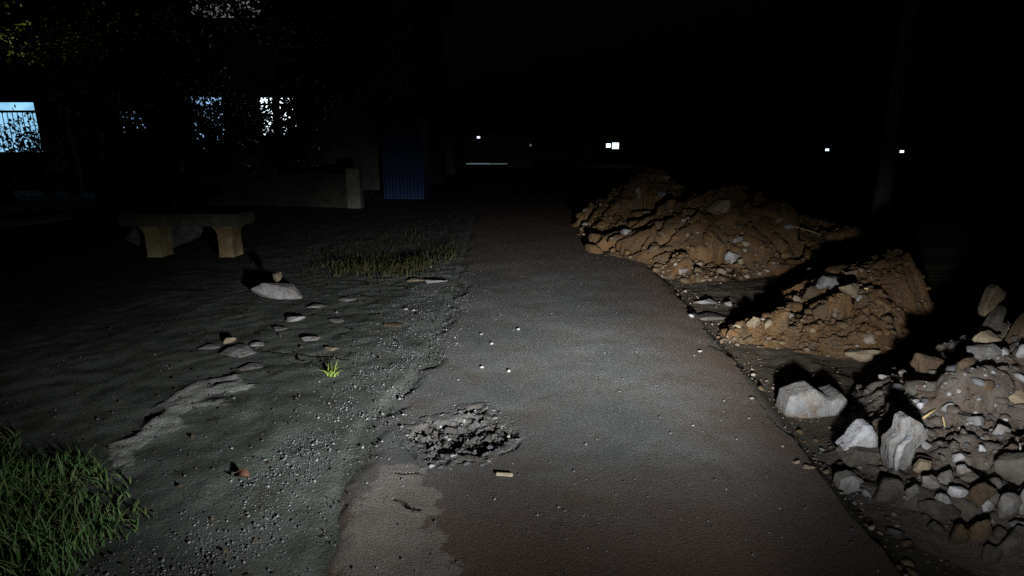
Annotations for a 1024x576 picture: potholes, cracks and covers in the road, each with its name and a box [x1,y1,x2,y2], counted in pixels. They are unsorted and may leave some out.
crack [384,468,433,516]
pothole [399,402,526,475]
